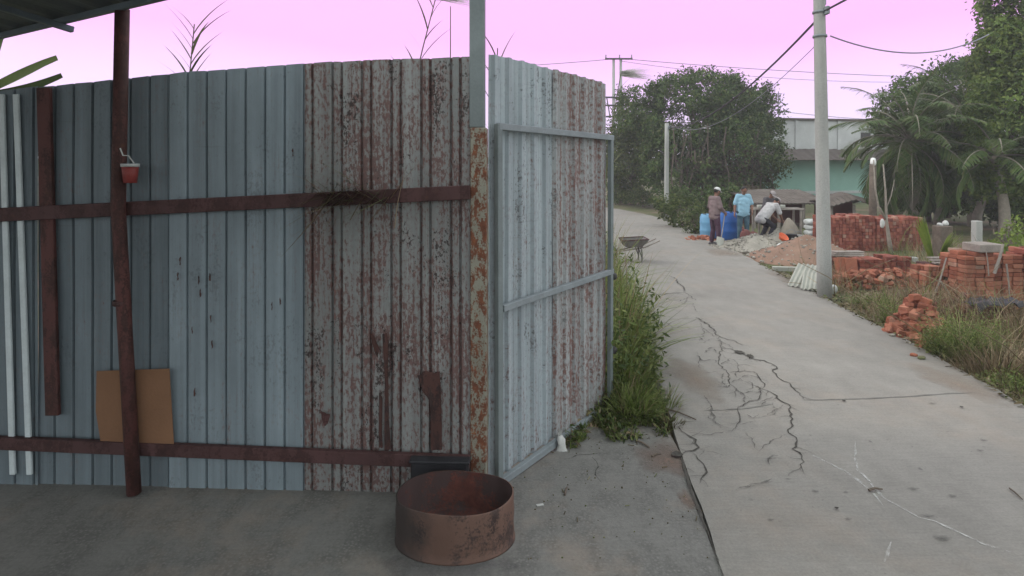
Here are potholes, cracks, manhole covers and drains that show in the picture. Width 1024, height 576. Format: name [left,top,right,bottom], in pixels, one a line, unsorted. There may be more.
crack [654,271,816,484]
